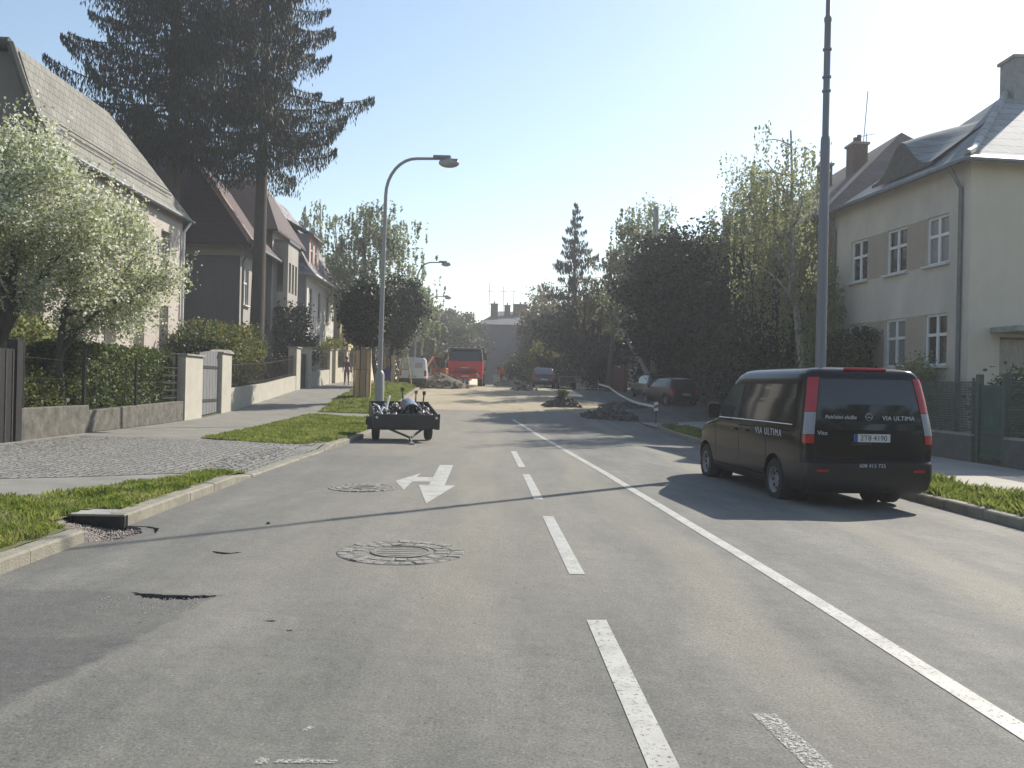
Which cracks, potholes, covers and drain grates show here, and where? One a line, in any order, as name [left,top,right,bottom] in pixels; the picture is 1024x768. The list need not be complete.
pothole [129,592,222,600]
manhole cover [328,483,398,492]
manhole cover [336,540,465,565]
